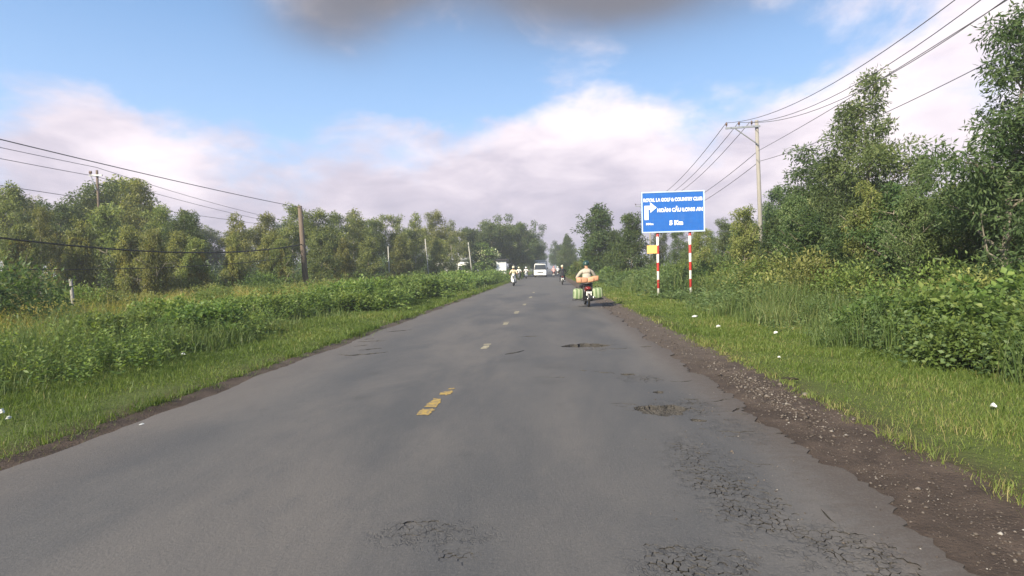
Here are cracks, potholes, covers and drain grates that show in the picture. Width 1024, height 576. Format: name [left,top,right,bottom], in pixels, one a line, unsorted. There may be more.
crack [341,330,405,356]
crack [628,376,920,576]
pothole [634,405,689,417]
